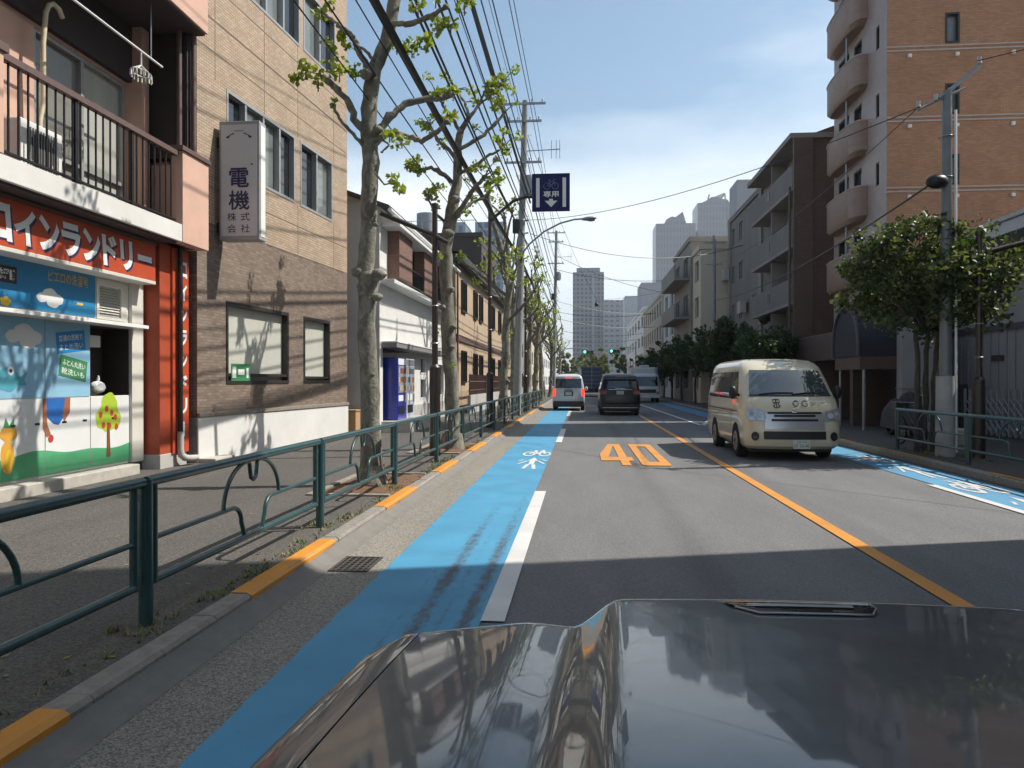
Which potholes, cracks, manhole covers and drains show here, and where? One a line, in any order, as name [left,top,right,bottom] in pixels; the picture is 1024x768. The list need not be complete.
drain grate [328,556,383,572]
